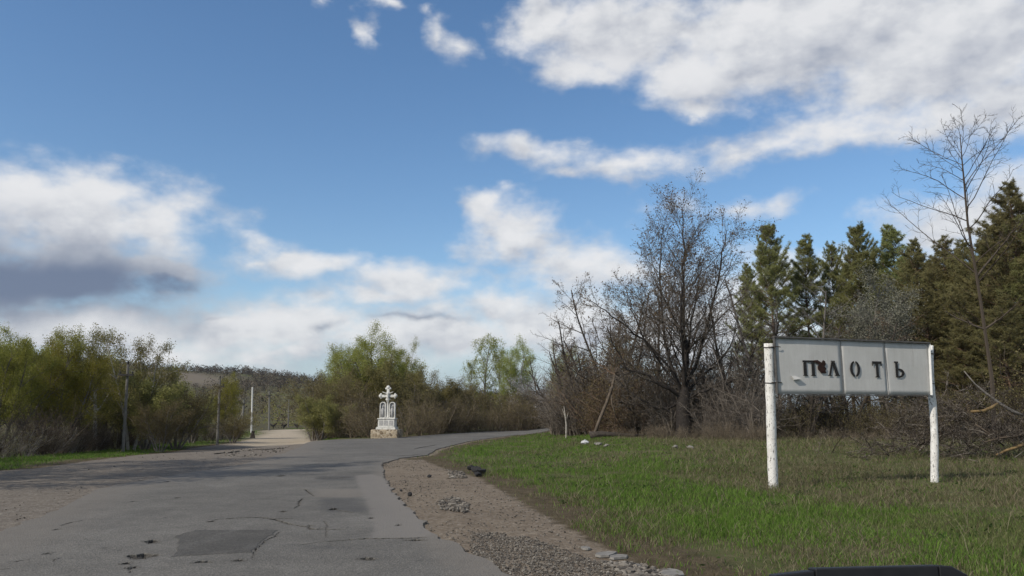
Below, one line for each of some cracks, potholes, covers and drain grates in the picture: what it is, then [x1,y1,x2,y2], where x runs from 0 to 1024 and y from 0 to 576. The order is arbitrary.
pothole [126,552,163,560]
crack [208,477,424,560]
